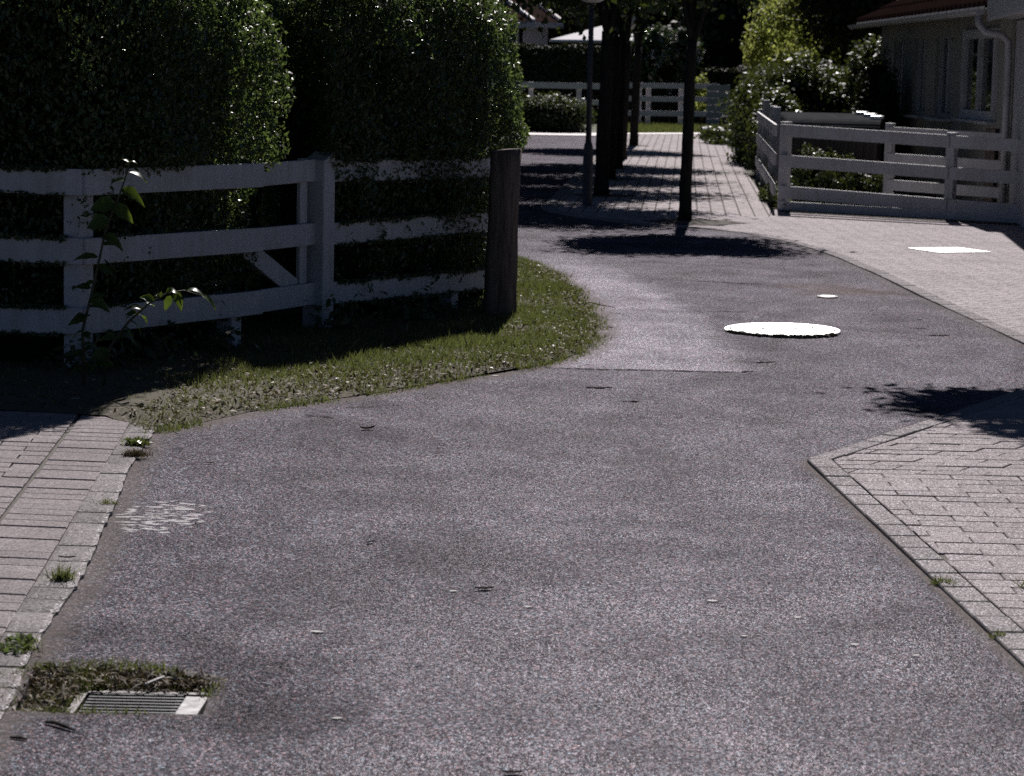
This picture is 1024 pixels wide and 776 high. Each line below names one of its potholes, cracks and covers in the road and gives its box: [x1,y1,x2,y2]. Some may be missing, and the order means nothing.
drain grate [15,665,209,714]
manhole cover [724,322,841,339]
